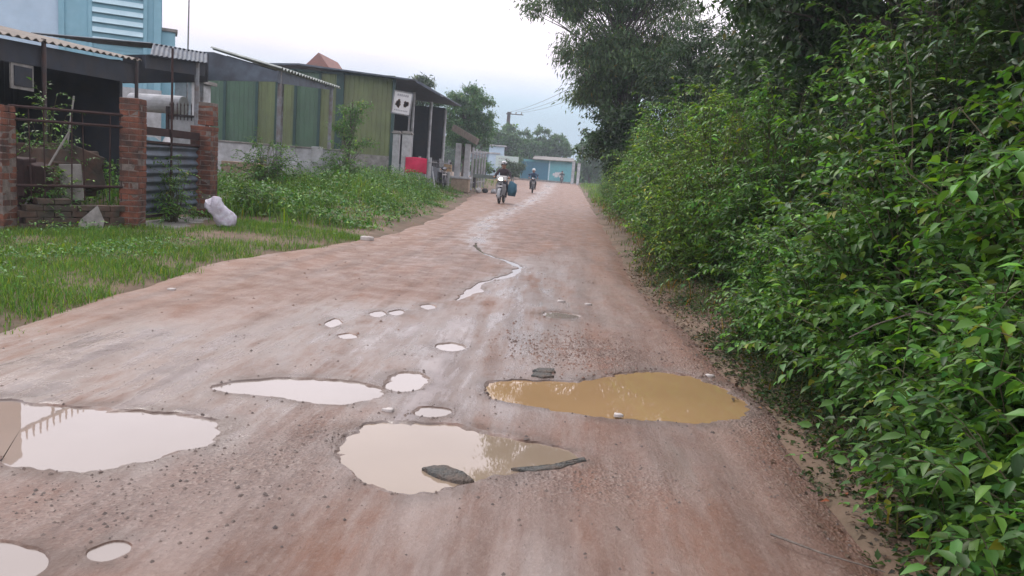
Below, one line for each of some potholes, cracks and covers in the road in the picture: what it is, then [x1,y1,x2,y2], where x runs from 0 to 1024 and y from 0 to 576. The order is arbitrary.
pothole [85,540,133,562]
pothole [0,539,51,576]
pothole [484,370,757,424]
pothole [333,420,581,495]
pothole [411,406,453,417]
pothole [539,311,581,319]
pothole [435,342,467,351]
pothole [382,371,433,392]
pothole [325,318,343,327]
pothole [210,377,387,405]
pothole [0,398,229,473]
